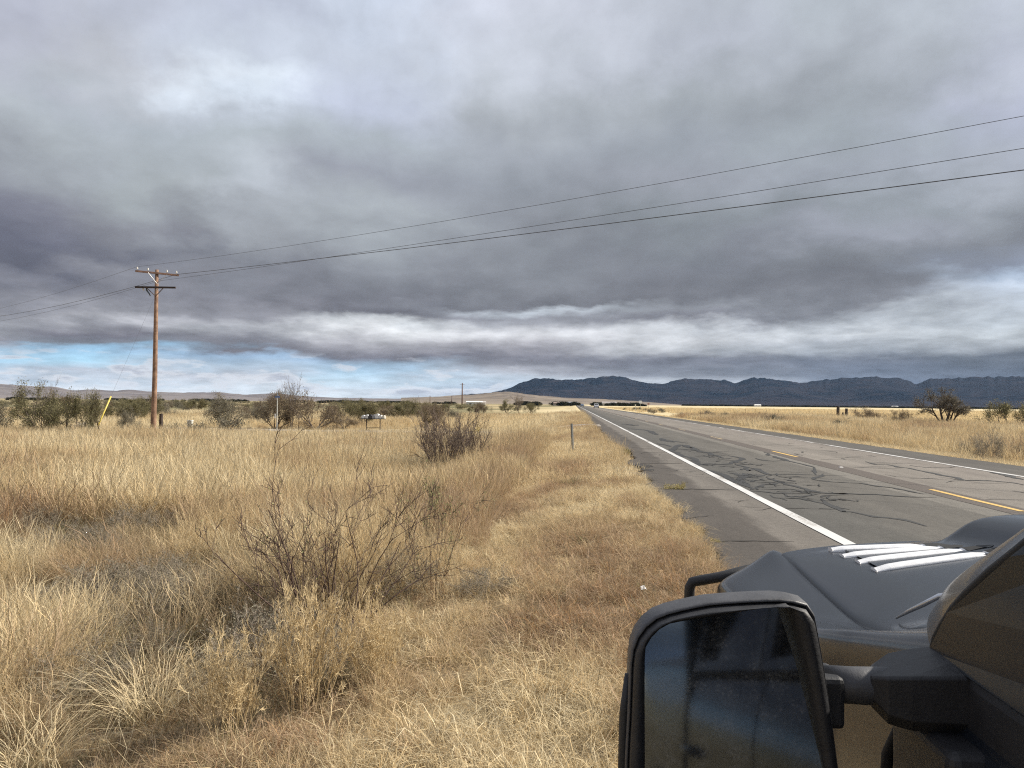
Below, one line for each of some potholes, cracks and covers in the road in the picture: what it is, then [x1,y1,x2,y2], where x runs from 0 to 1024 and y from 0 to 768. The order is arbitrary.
crack [621,424,1024,511]
